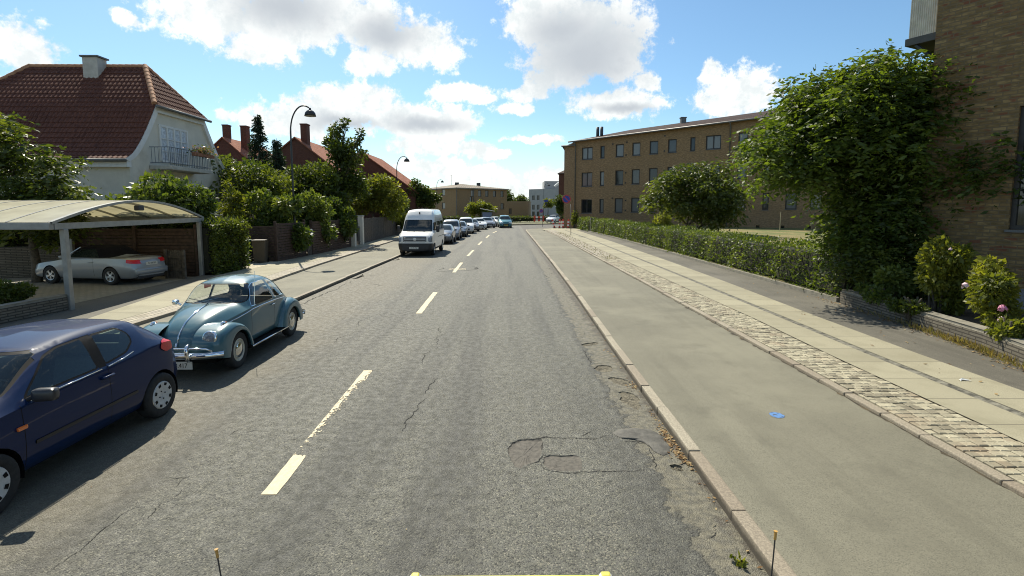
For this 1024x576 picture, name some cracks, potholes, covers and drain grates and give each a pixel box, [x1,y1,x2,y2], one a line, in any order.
pothole [618,391,641,410]
pothole [543,455,582,471]
pothole [508,439,543,468]
pothole [608,377,631,386]
crack [524,431,657,473]
